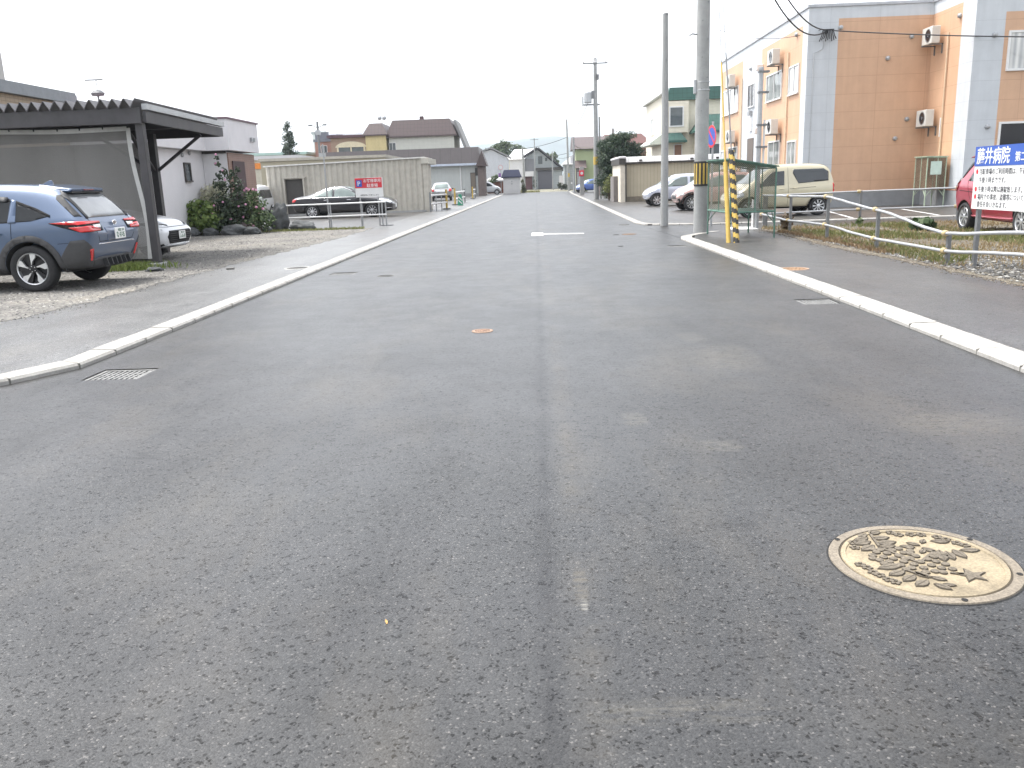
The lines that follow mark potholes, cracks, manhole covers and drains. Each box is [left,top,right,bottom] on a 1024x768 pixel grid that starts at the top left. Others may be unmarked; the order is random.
manhole cover [826,526,1024,606]
drain grate [85,369,156,380]
